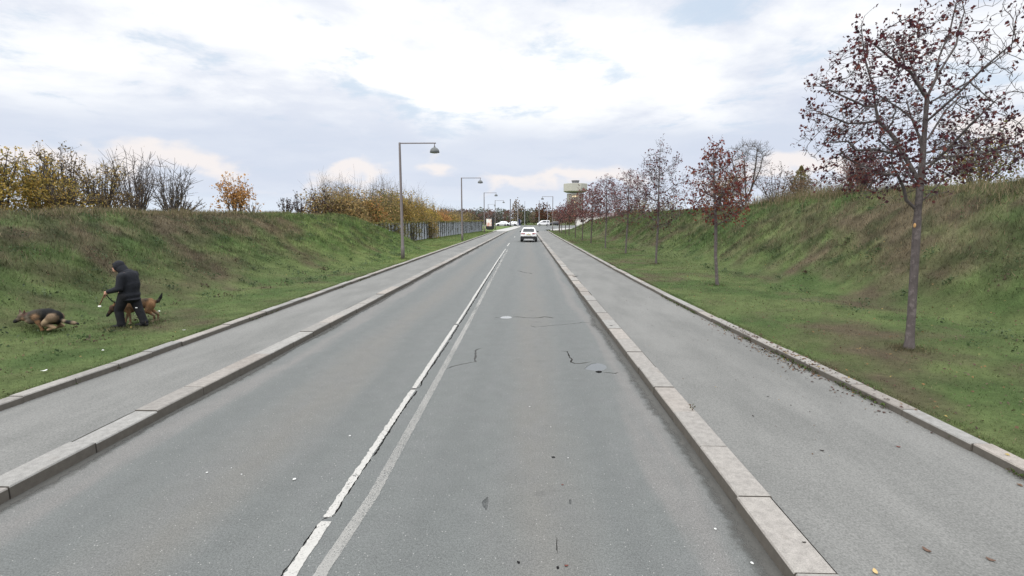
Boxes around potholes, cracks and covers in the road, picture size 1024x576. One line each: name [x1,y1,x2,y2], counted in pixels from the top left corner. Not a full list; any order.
pothole [584,363,607,371]
